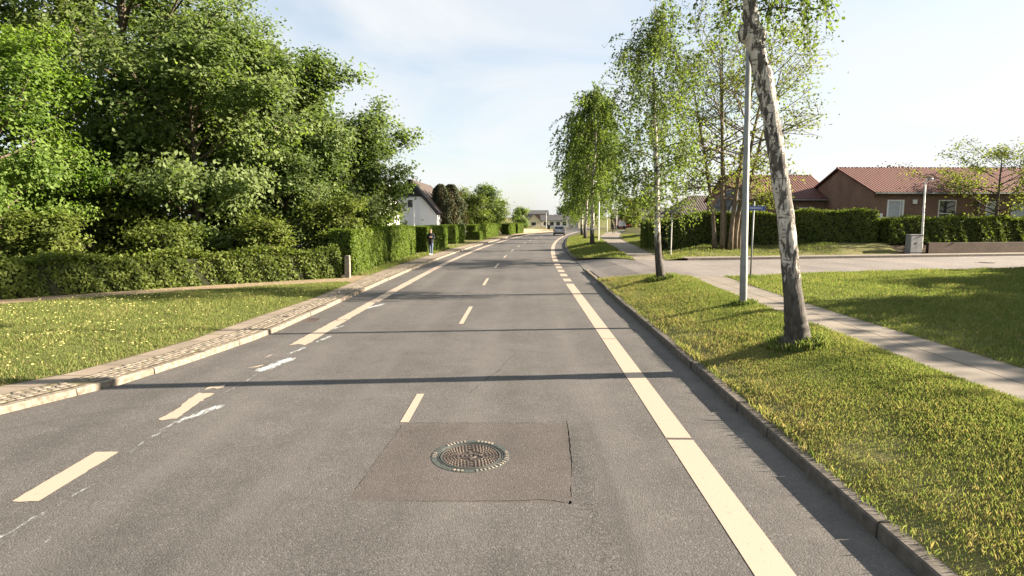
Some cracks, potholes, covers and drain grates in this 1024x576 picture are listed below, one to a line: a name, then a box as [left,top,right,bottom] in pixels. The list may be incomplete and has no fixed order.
manhole cover [431,440,511,473]
